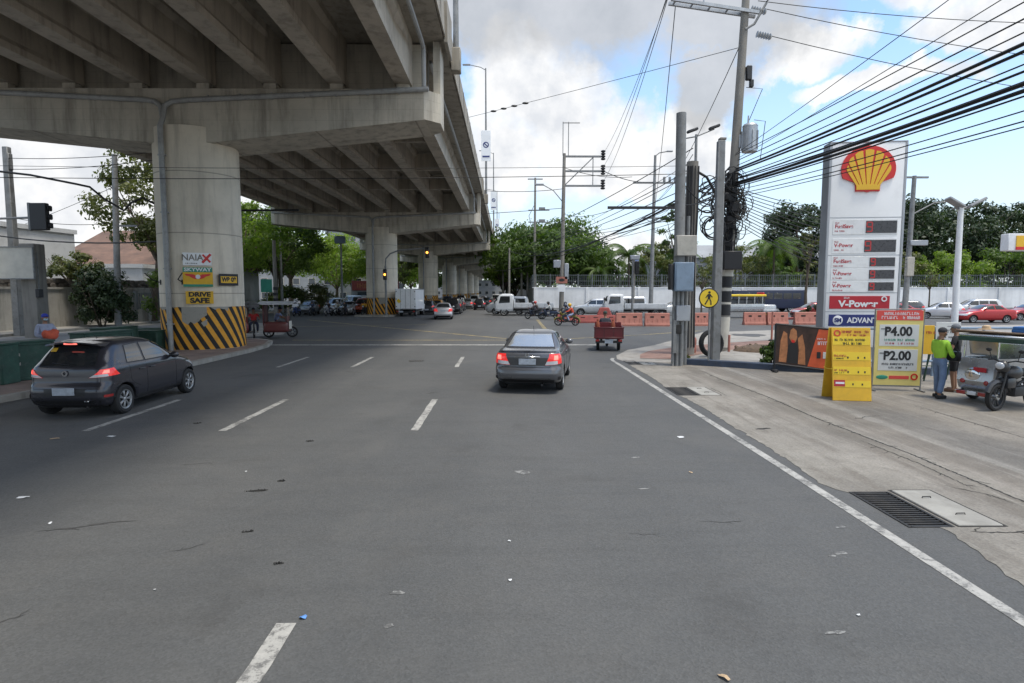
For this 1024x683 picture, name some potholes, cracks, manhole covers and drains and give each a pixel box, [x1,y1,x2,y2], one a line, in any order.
drain grate [665,387,700,396]
crack [866,442,1012,503]
drain grate [849,492,955,528]
crack [41,520,136,531]
